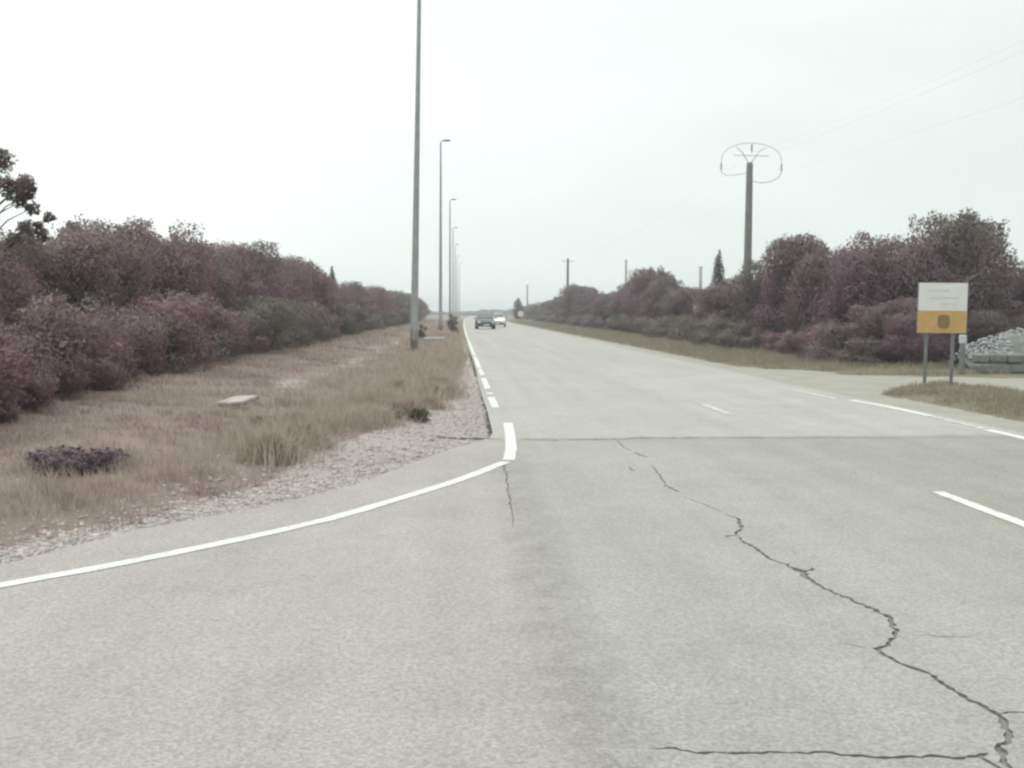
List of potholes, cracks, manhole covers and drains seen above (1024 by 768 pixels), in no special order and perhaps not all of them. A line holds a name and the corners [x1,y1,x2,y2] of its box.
crack [617,440,719,511]
crack [648,515,1024,768]
